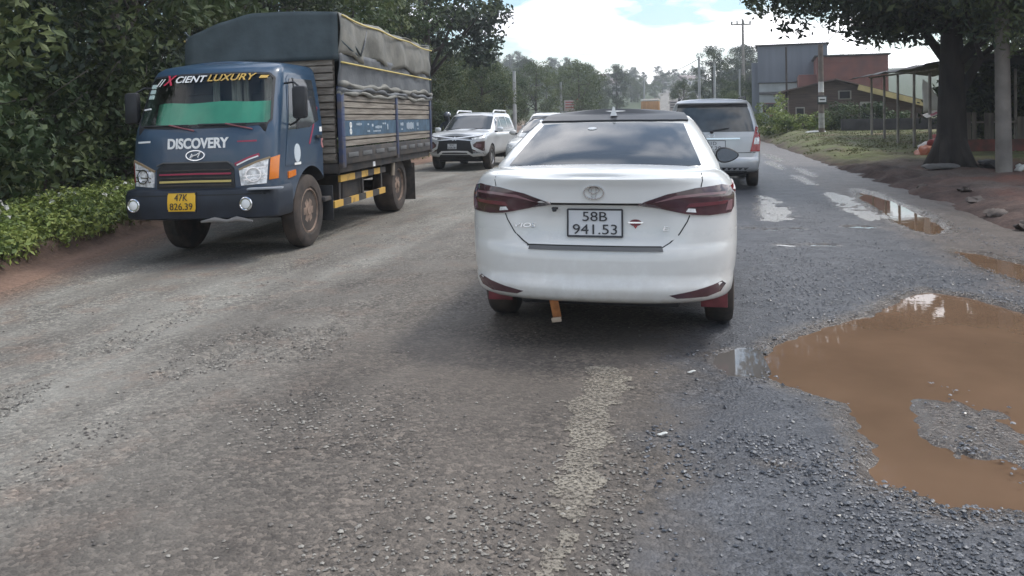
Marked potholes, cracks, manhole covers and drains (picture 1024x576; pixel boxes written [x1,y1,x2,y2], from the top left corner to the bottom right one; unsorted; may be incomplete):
pothole [762,287,1024,515]
pothole [706,346,771,379]
pothole [853,189,956,235]
pothole [947,248,1024,283]
